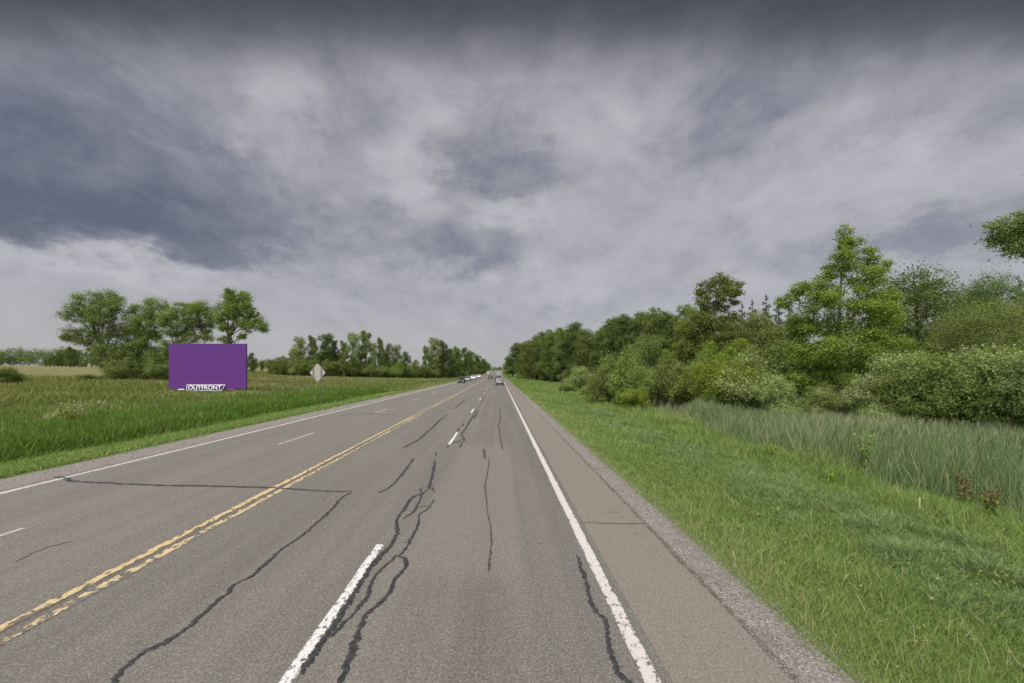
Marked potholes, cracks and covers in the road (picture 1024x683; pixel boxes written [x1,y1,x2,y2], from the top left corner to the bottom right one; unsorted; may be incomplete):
crack [482,408,503,572]
